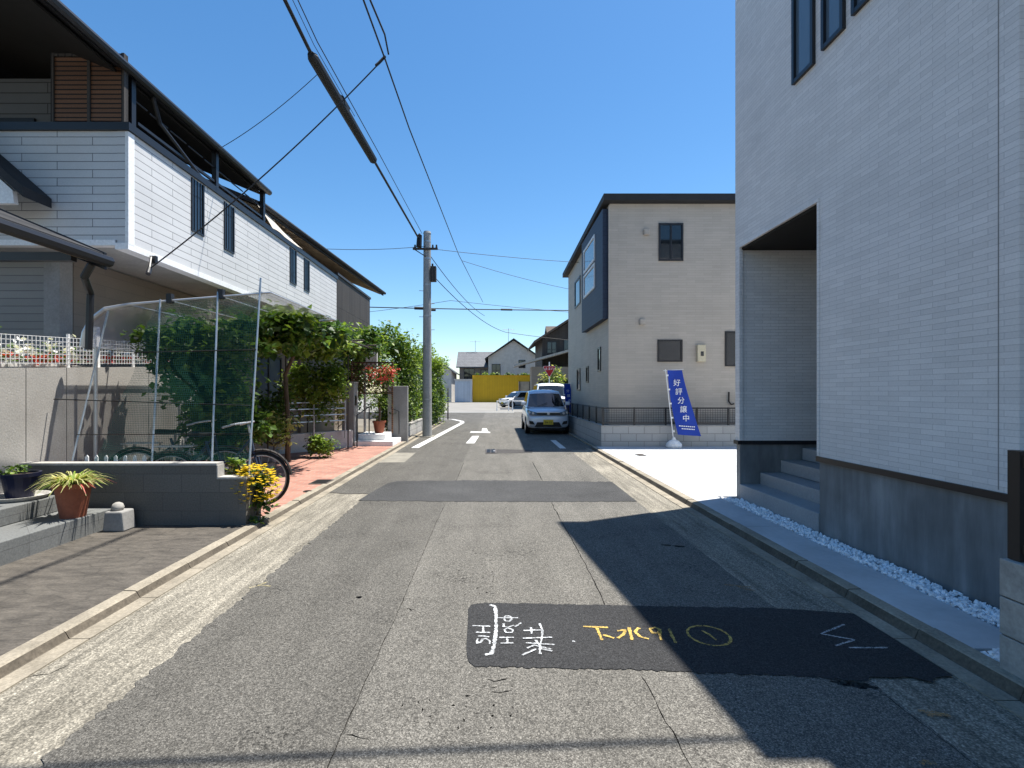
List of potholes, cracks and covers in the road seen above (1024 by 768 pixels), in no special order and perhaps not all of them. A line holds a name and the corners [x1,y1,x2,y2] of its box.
crack [641,676,692,768]
pothole [829,680,877,689]
